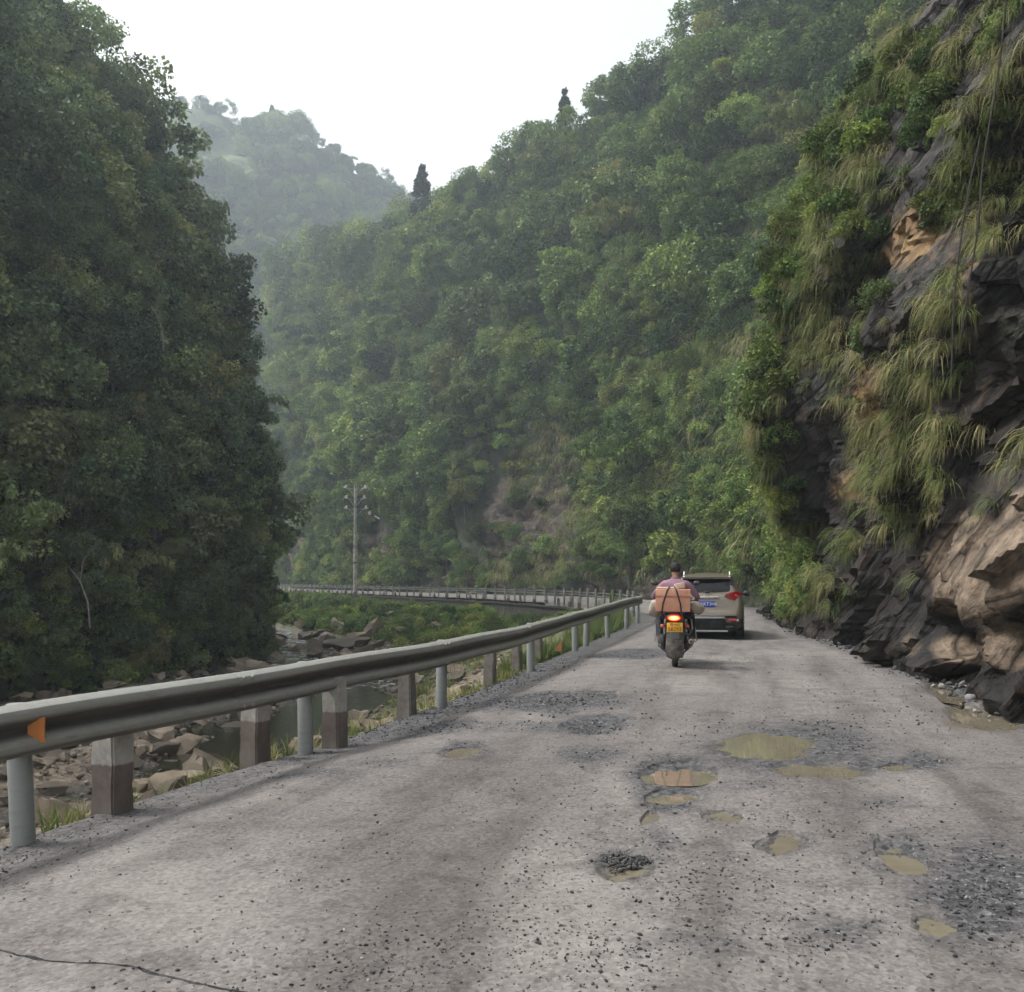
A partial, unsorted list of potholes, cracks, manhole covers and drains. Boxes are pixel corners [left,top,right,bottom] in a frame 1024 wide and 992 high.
pothole [590,852,661,882]
pothole [753,830,812,855]
pothole [879,762,914,772]
pothole [699,810,746,822]
crack [0,950,248,992]
pothole [873,838,932,880]
pothole [941,703,1024,732]
pothole [642,787,703,805]
pothole [703,733,827,761]
pothole [437,747,486,758]
pothole [909,912,960,938]
pothole [639,810,660,826]
